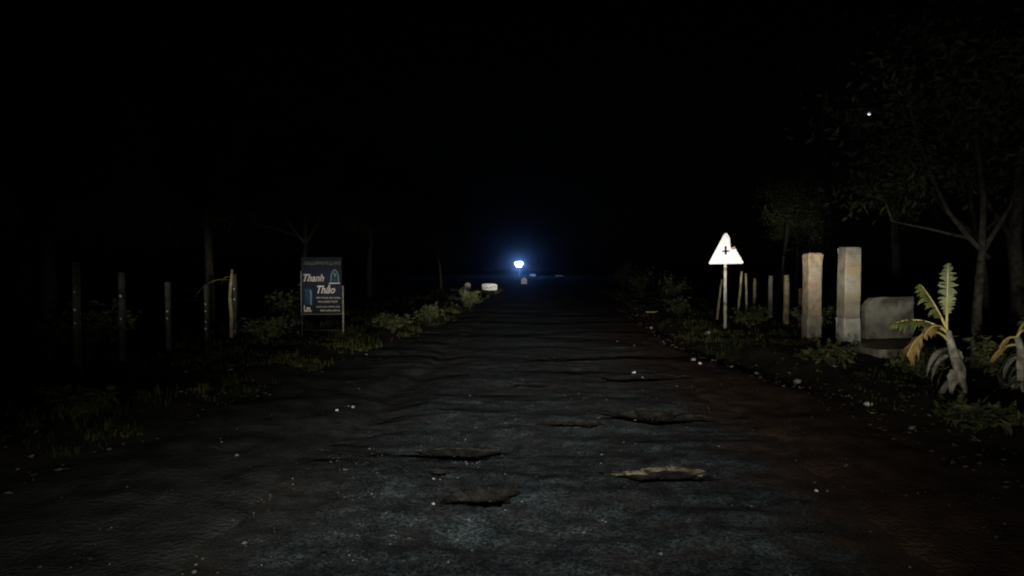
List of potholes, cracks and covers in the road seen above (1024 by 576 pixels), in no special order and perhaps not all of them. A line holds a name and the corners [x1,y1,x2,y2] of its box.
pothole [595,408,719,425]
pothole [533,420,607,428]
pothole [591,373,695,382]
pothole [439,488,522,508]
pothole [599,466,716,483]
pothole [399,447,509,461]
